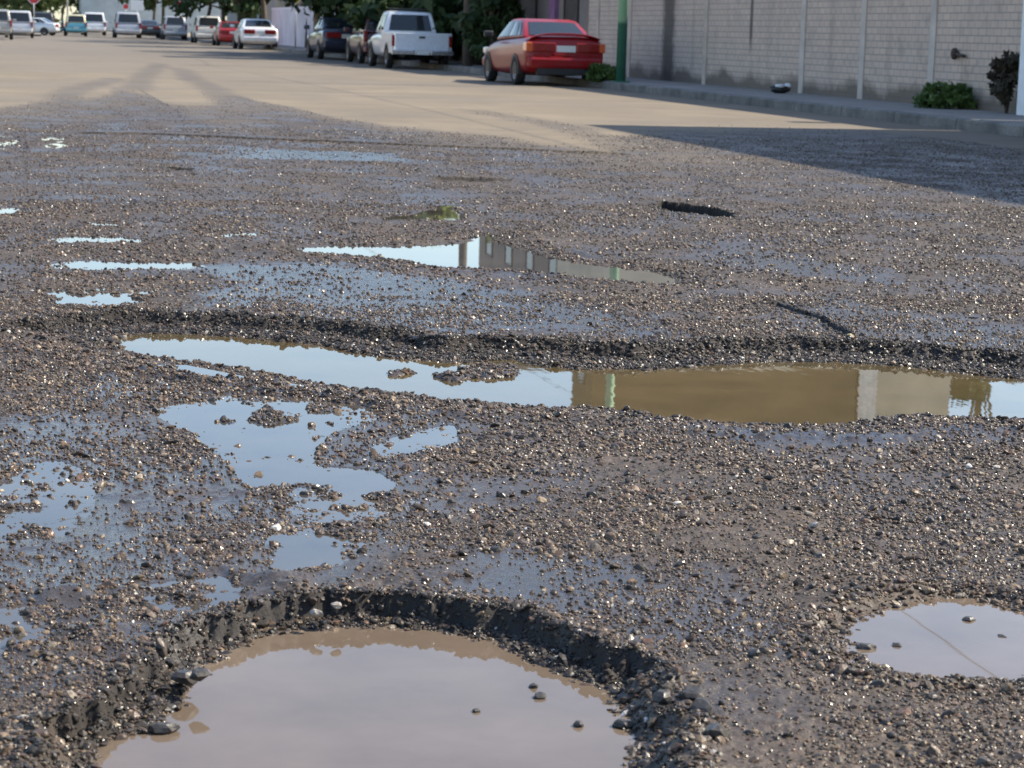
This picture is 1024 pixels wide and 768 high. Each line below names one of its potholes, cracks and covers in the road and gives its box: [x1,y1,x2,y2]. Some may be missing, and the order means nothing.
pothole [19,590,703,768]
pothole [0,305,1024,437]
pothole [245,227,724,286]
pothole [805,581,1024,685]
crack [769,302,854,334]
